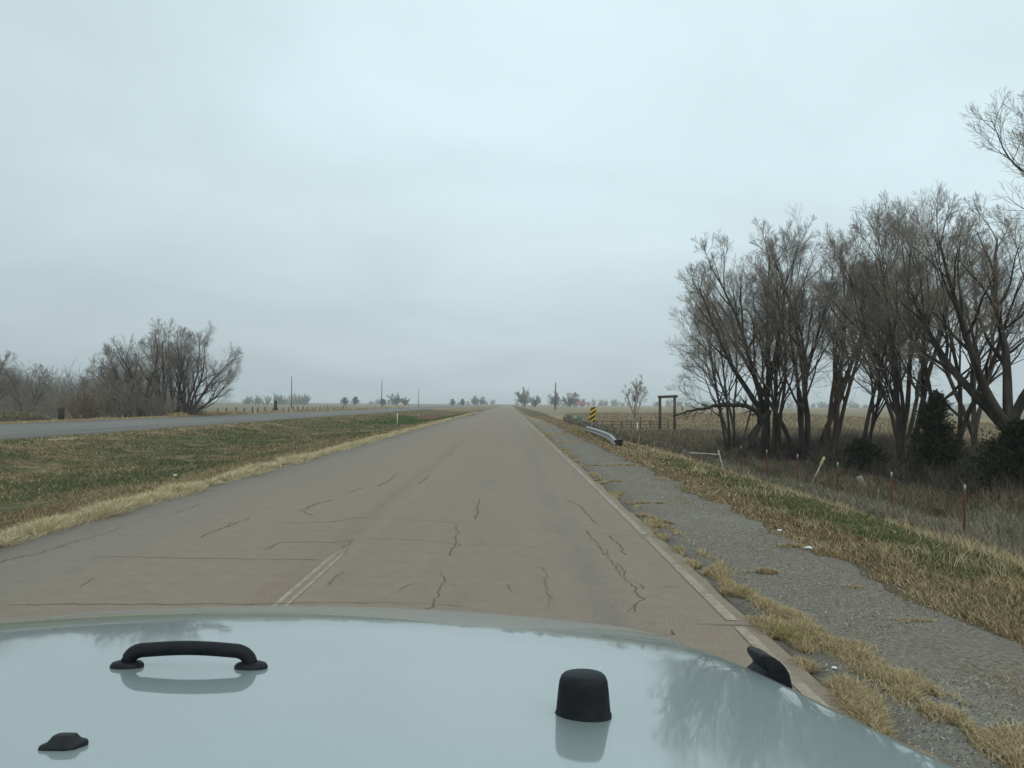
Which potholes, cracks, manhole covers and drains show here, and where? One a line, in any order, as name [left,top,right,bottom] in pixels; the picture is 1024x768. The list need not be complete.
crack [266,488,755,635]
crack [2,527,467,609]
